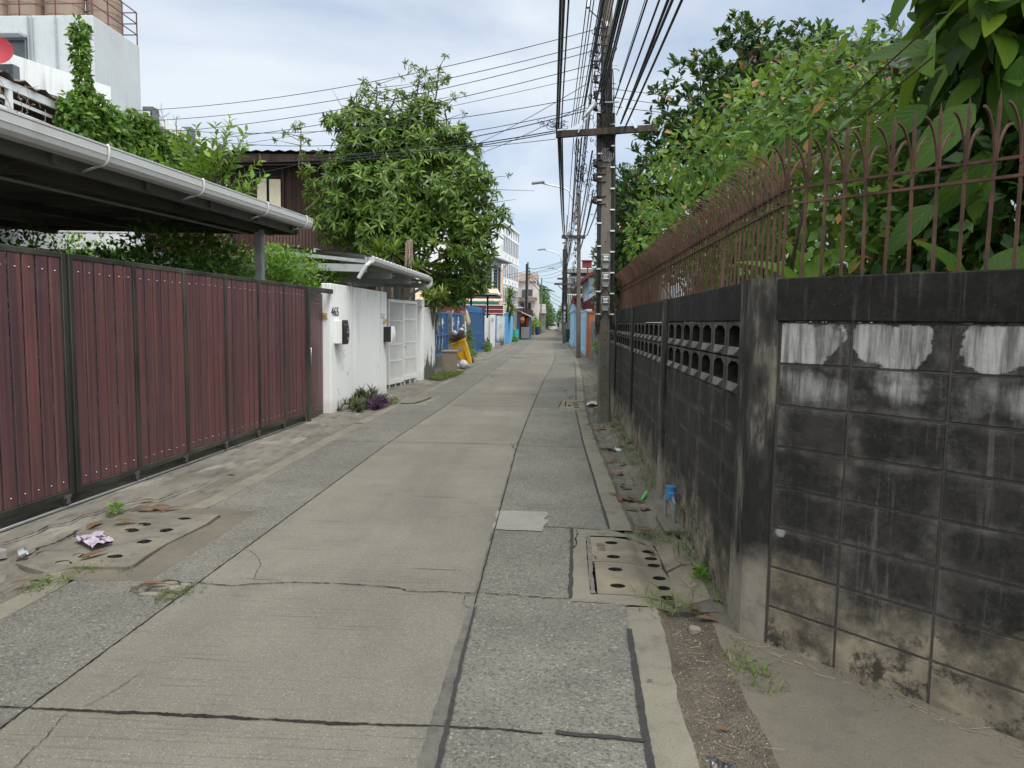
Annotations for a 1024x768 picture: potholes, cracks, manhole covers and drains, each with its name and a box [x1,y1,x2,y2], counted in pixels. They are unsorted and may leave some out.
crack [199,549,570,608]
